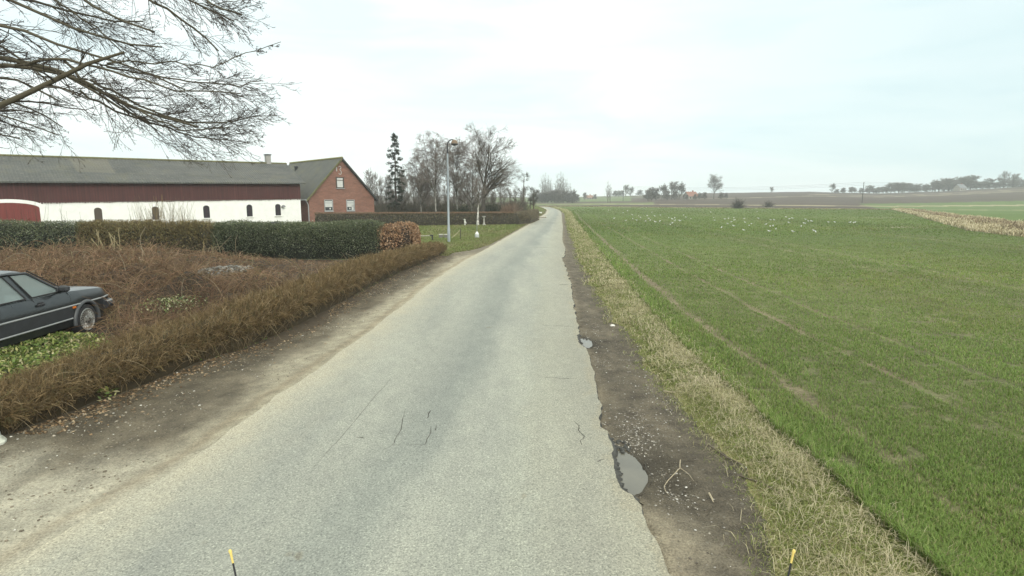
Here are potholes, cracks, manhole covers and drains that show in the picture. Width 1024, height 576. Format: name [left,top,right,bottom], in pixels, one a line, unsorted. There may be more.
pothole [608,435,652,505]
pothole [577,334,594,348]
